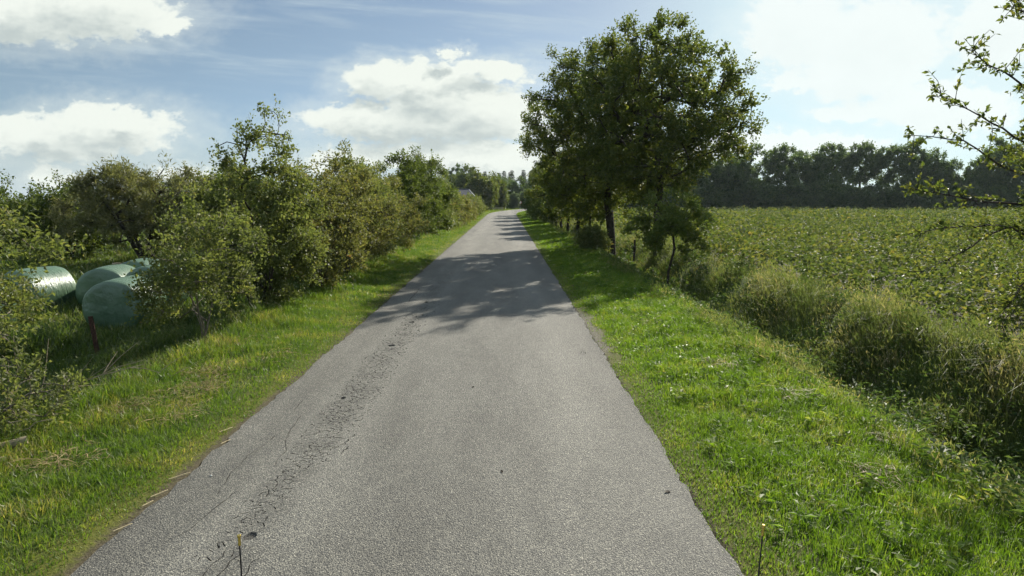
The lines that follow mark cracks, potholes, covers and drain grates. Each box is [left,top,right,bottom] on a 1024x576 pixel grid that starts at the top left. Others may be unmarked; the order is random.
crack [176,268,453,576]
